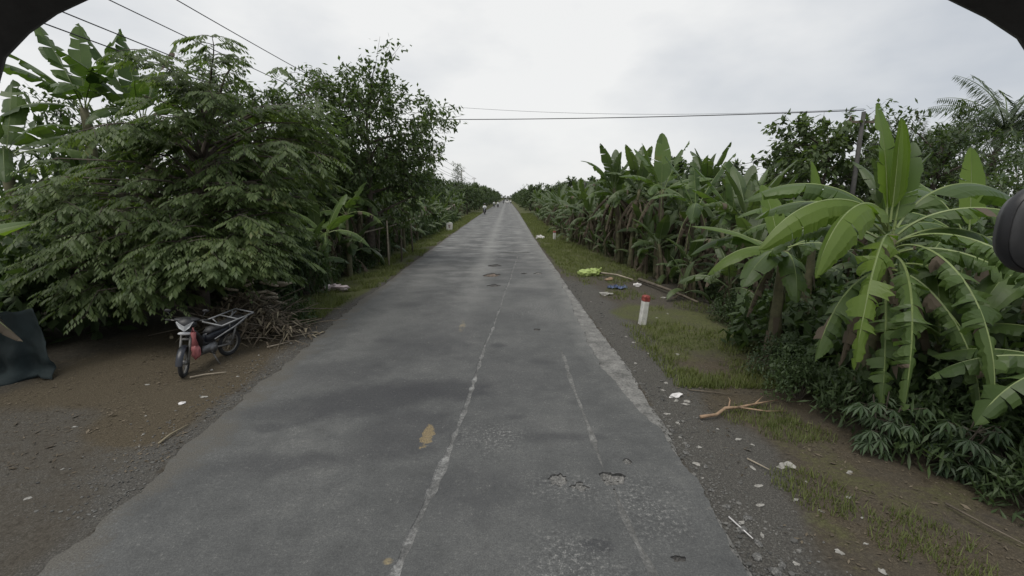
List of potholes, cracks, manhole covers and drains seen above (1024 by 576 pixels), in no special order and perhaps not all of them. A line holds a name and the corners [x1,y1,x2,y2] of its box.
pothole [569,481,590,491]
pothole [548,473,567,487]
pothole [598,472,626,485]
